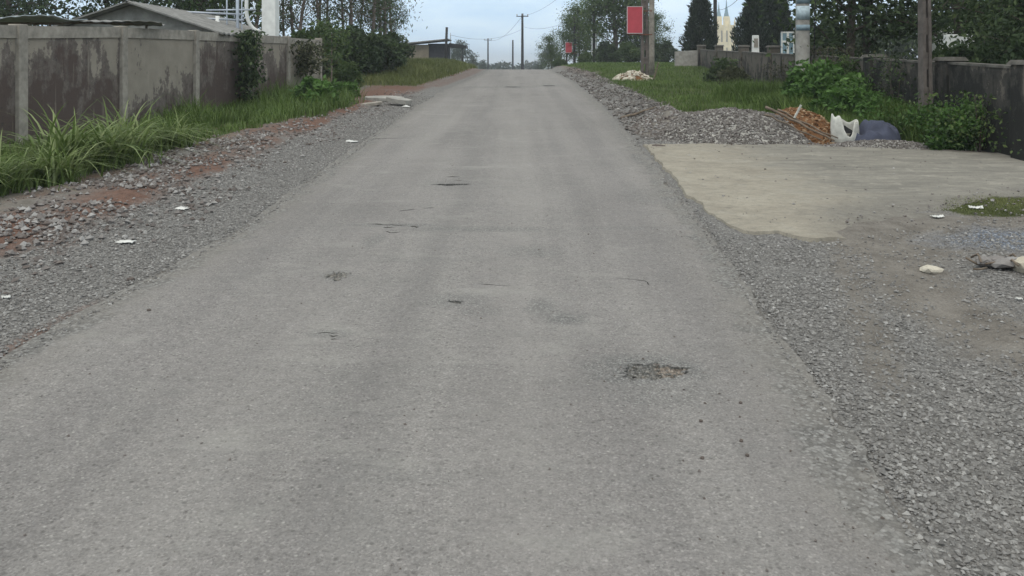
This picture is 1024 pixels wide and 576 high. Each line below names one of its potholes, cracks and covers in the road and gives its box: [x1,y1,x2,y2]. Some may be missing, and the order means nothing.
pothole [619,361,692,382]
pothole [324,271,352,281]
